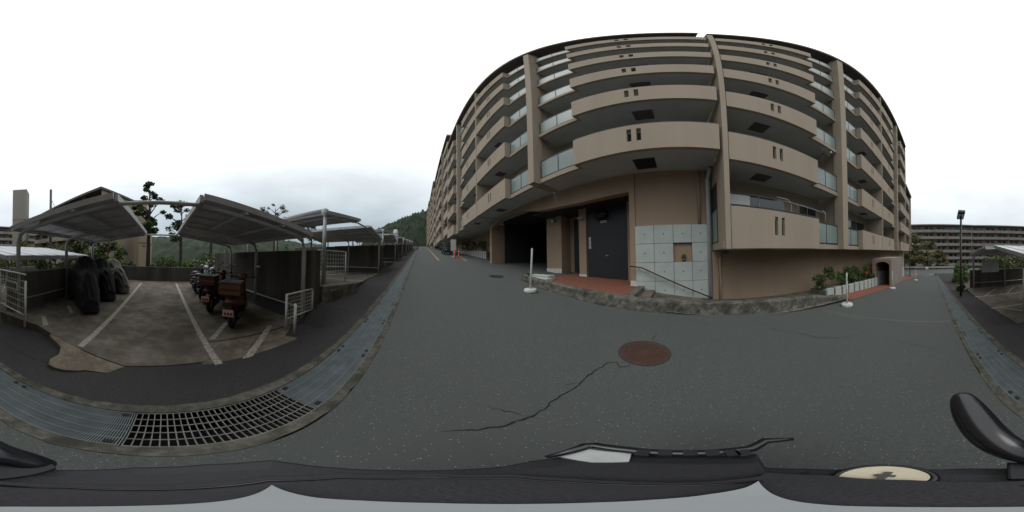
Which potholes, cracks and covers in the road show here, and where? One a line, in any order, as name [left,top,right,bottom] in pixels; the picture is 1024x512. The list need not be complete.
drain grate [956,319,981,334]
drain grate [277,348,367,408]
drain grate [951,310,970,320]
manhole cover [618,341,671,366]
drain grate [339,320,385,354]
drain grate [365,303,394,322]
crack [441,362,630,432]
drain grate [379,292,399,304]
drain grate [963,332,1002,357]
drain grate [120,389,317,447]
